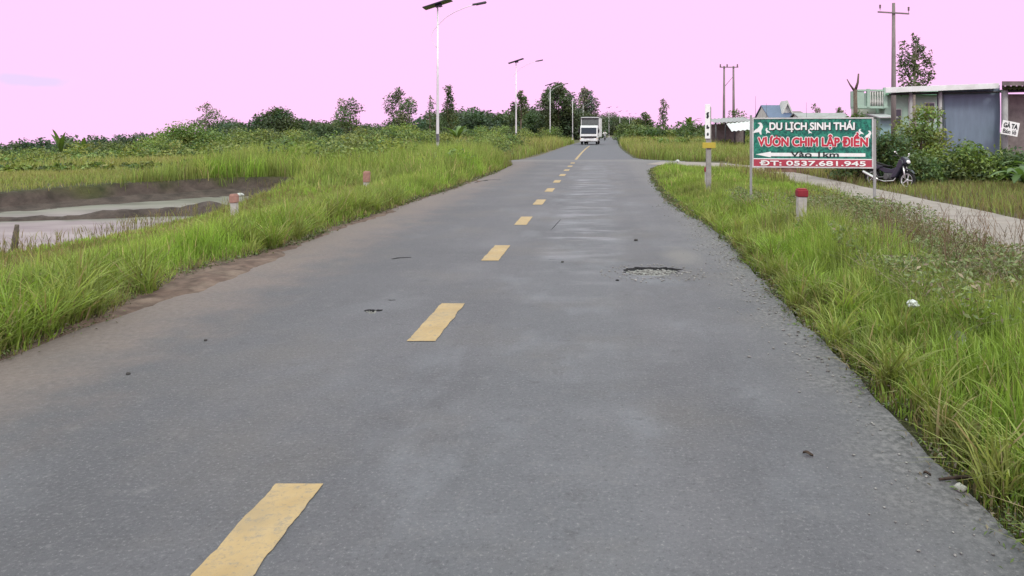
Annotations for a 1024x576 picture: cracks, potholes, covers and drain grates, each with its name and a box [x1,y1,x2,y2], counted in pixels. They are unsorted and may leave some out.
pothole [623,267,683,276]
